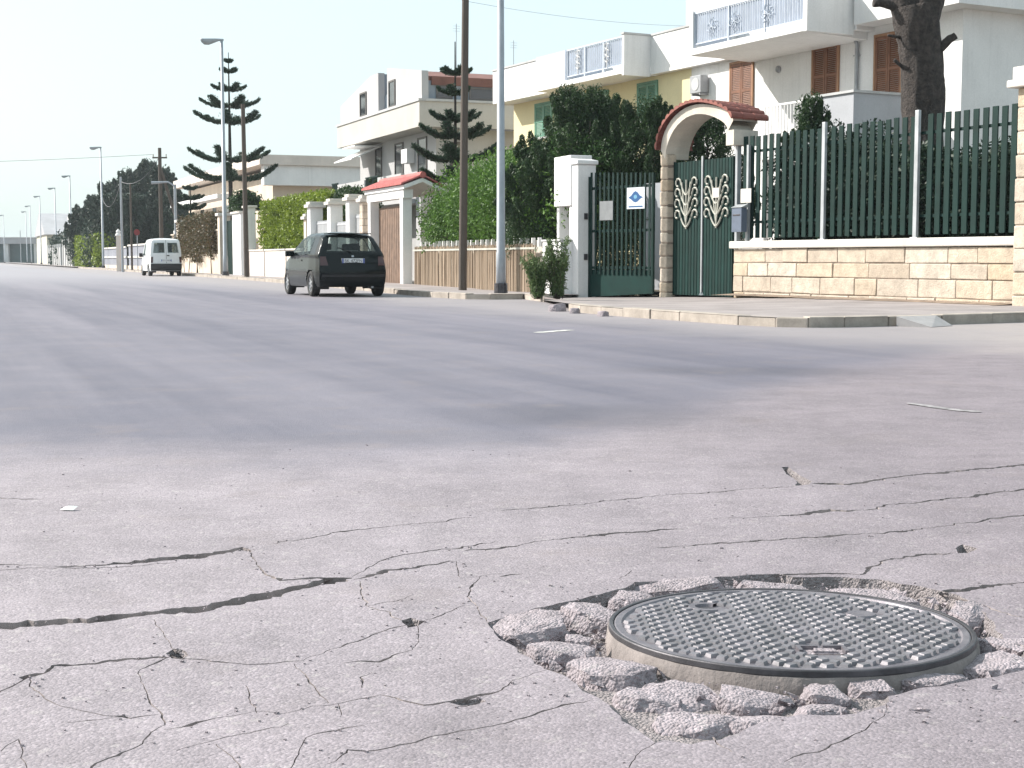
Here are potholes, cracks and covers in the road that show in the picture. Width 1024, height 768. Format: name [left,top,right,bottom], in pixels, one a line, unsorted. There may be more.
pothole [488,574,1024,744]
manhole cover [605,588,980,696]
crack [0,464,1024,768]
